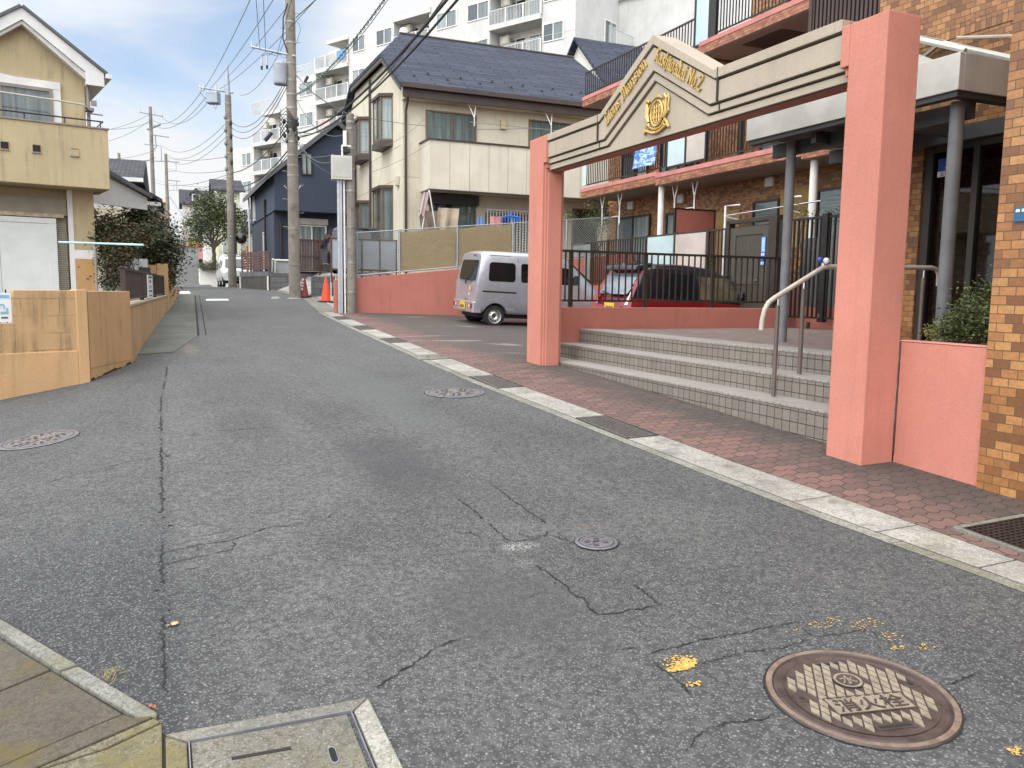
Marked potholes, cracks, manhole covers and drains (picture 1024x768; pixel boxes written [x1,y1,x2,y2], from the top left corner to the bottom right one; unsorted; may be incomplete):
drain grate [951,514,1024,555]
crack [531,563,659,614]
drain grate [469,375,521,389]
crack [686,714,774,751]
crack [377,628,492,689]
crack [50,364,331,695]
drain grate [576,415,655,439]
crack [608,621,878,696]
utility cover [165,698,403,768]
manhole cover [424,387,485,398]
manhole cover [573,534,620,551]
manhole cover [0,430,80,451]
